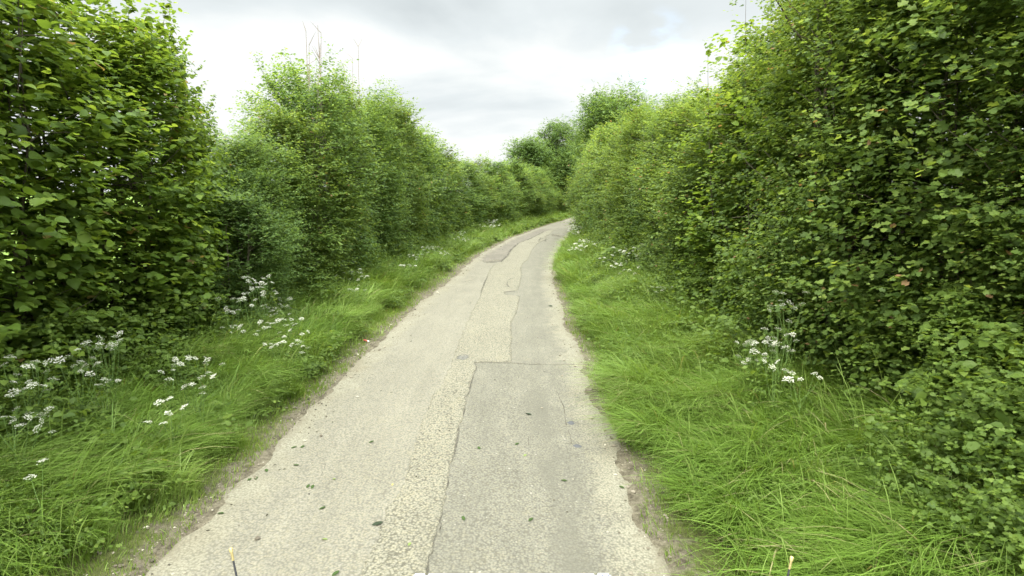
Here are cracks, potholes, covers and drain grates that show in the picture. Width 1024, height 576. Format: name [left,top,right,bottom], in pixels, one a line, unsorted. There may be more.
crack [427,364,477,572]
